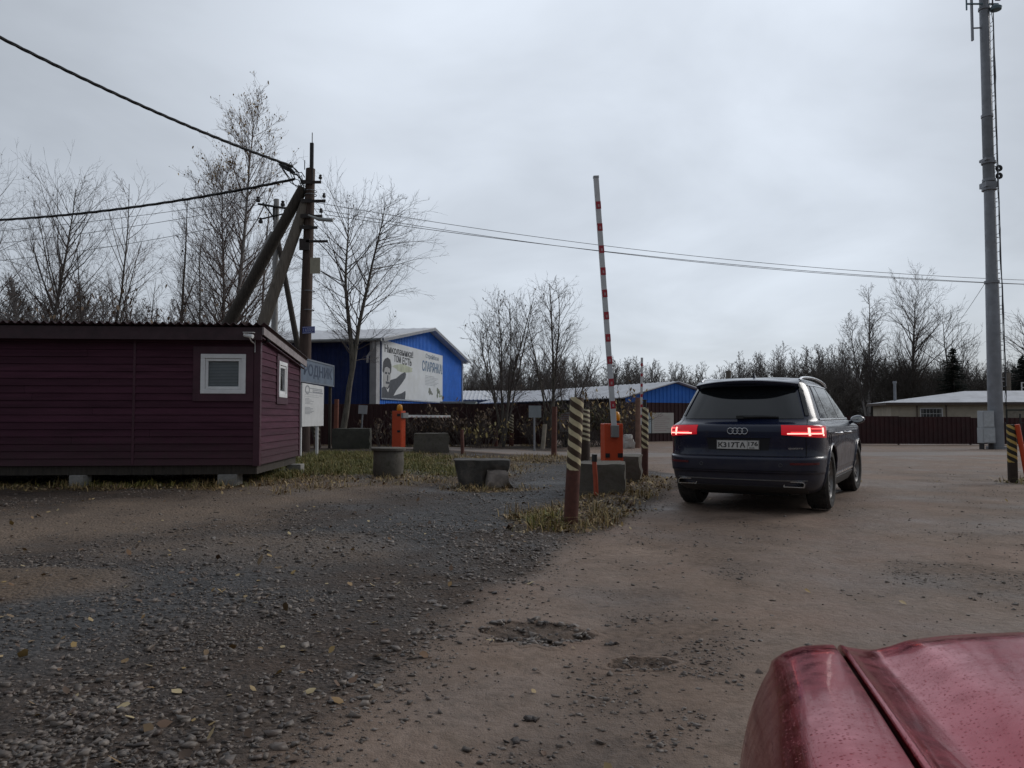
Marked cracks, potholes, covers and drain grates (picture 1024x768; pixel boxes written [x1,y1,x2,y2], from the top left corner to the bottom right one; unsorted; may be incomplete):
pothole [598,655,687,672]
pothole [465,616,608,651]
